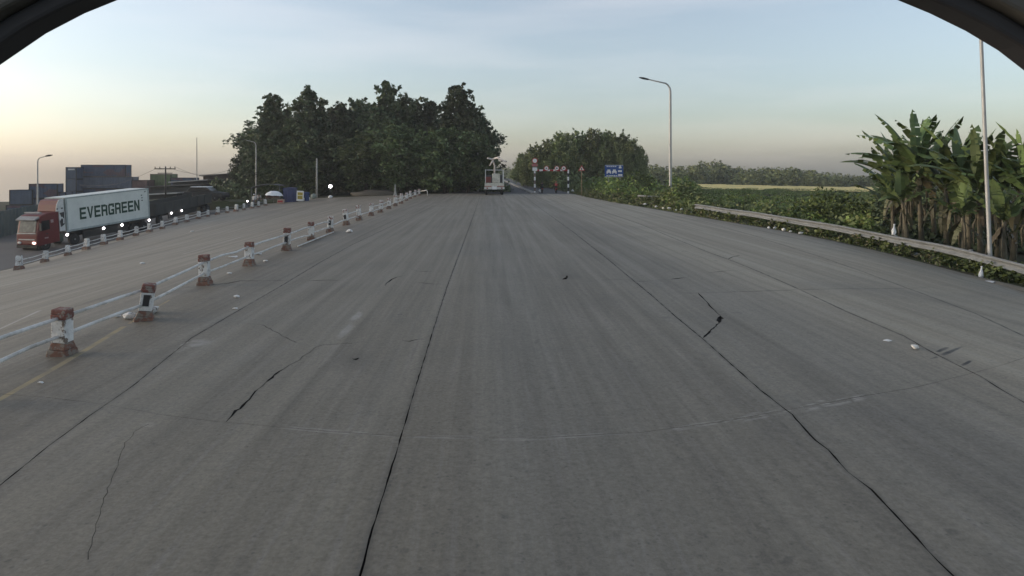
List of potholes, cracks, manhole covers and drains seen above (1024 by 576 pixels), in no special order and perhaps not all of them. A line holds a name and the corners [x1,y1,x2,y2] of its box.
crack [88,426,144,560]
crack [226,326,347,422]
crack [698,293,724,338]
